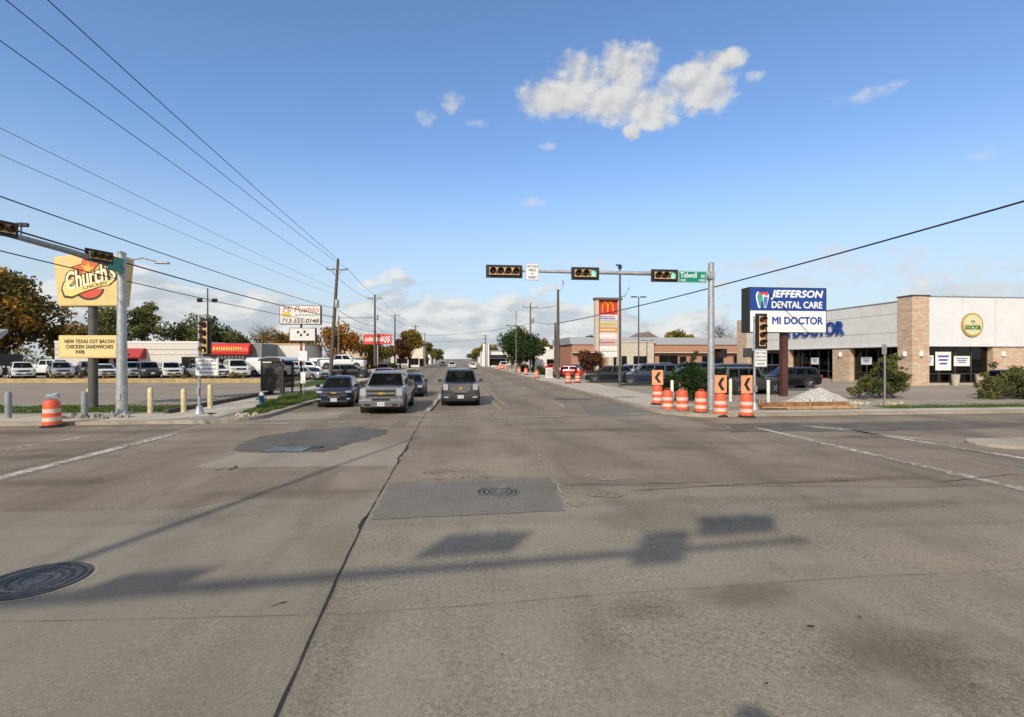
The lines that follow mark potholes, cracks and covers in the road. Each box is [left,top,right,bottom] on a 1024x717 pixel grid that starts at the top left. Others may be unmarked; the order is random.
manhole cover [476,486,519,498]
manhole cover [0,562,93,601]
